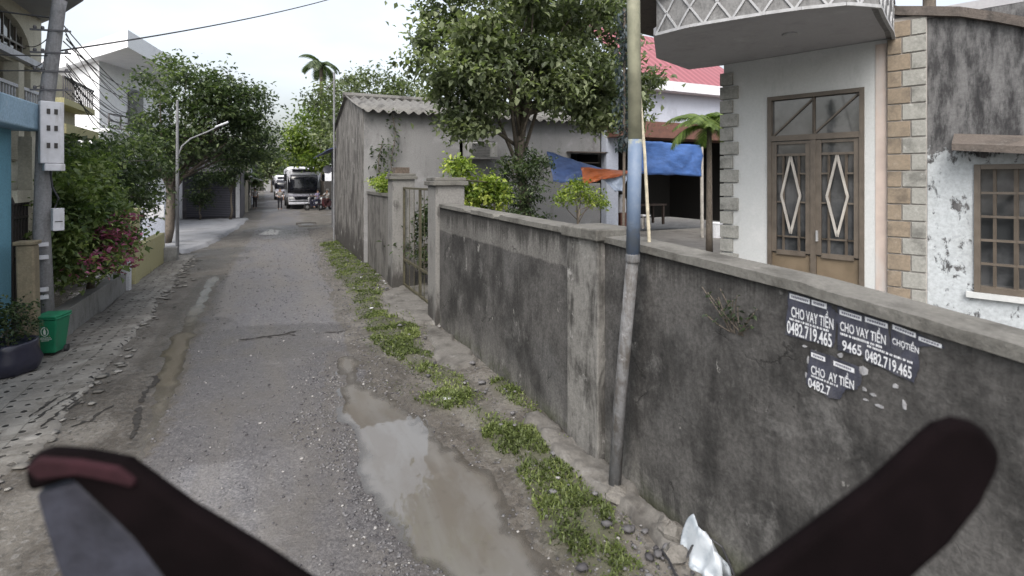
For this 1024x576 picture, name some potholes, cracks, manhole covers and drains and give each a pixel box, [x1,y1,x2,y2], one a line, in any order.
crack [29,376,160,438]
pothole [318,350,579,576]
crack [239,330,298,340]
